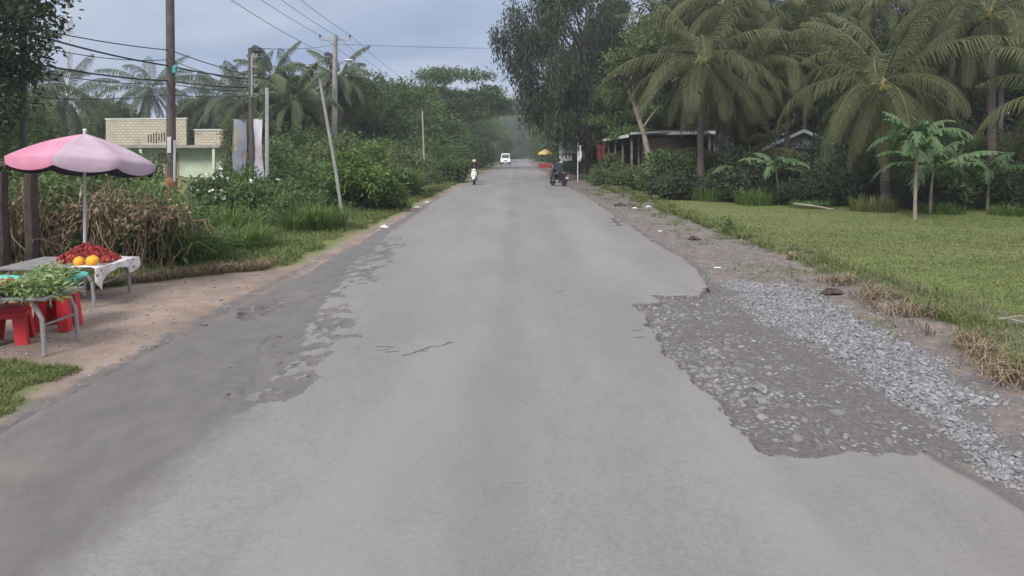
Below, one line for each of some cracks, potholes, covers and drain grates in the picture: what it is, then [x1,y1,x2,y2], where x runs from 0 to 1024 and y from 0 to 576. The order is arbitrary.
pothole [623,287,973,463]
